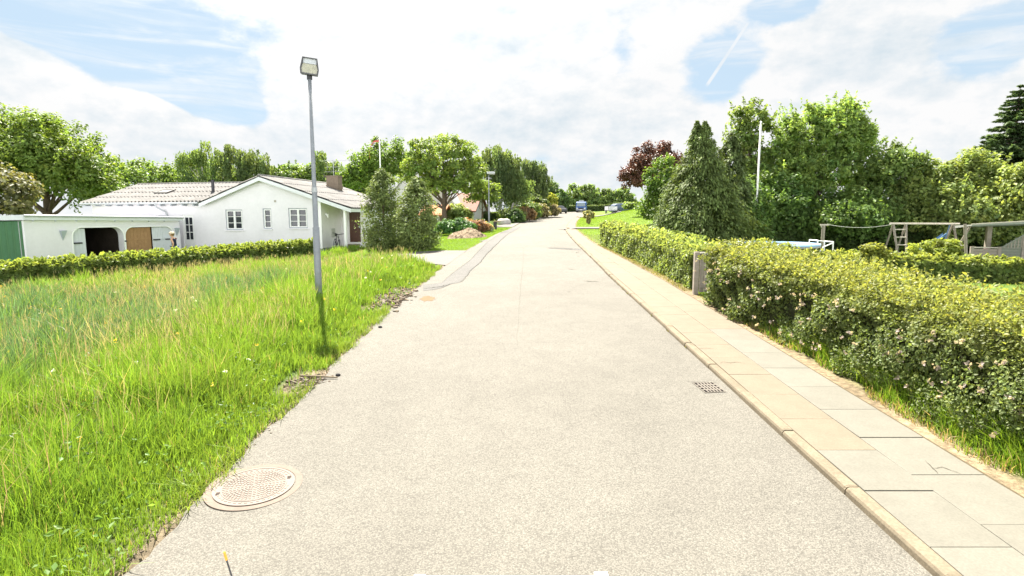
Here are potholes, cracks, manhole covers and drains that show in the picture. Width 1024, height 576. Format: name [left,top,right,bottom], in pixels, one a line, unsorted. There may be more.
drain grate [693,382,726,393]
manhole cover [203,464,303,512]
